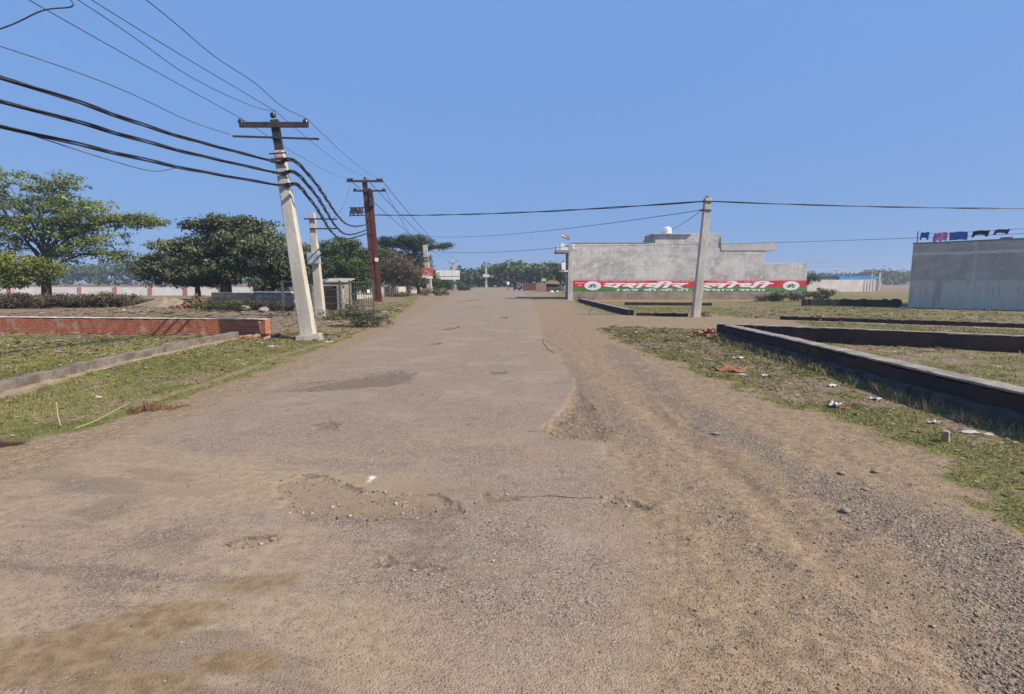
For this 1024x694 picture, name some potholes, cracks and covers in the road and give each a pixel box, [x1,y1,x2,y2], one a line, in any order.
pothole [223,536,278,548]
pothole [540,388,618,441]
pothole [270,474,466,526]
pothole [378,555,445,575]
